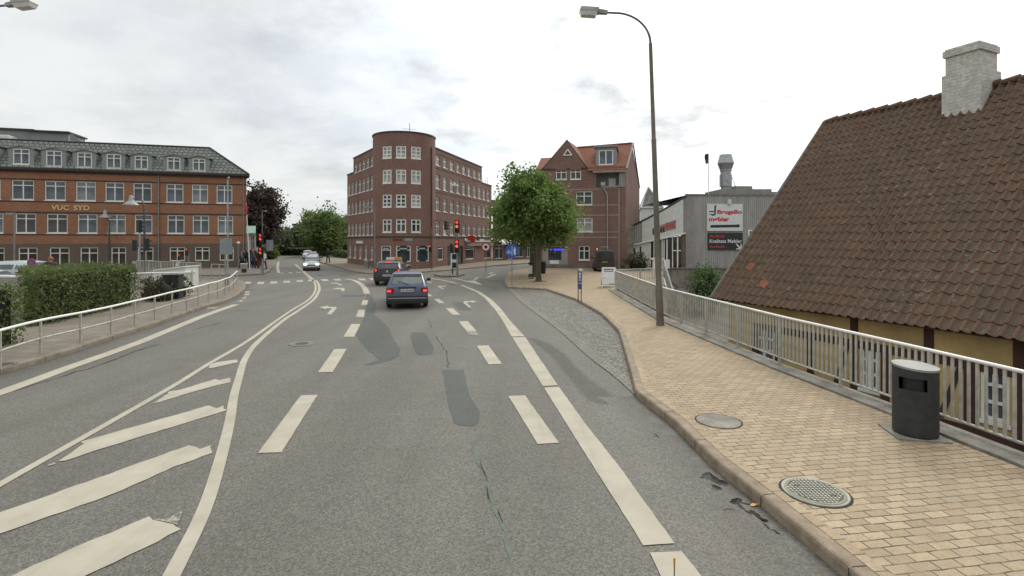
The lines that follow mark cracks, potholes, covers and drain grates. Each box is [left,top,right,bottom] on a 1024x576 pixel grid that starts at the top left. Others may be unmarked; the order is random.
pothole [700,472,730,486]
manhole cover [695,413,743,429]
